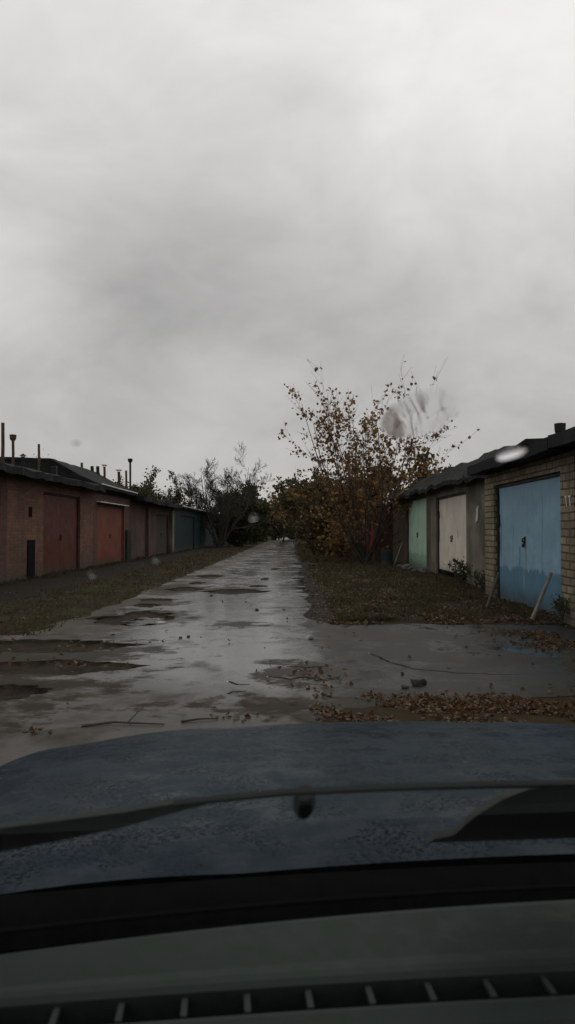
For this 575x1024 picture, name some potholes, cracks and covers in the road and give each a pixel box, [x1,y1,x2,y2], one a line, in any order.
pothole [0,639,147,653]
pothole [0,659,150,675]
pothole [88,611,175,626]
pothole [0,684,53,701]
